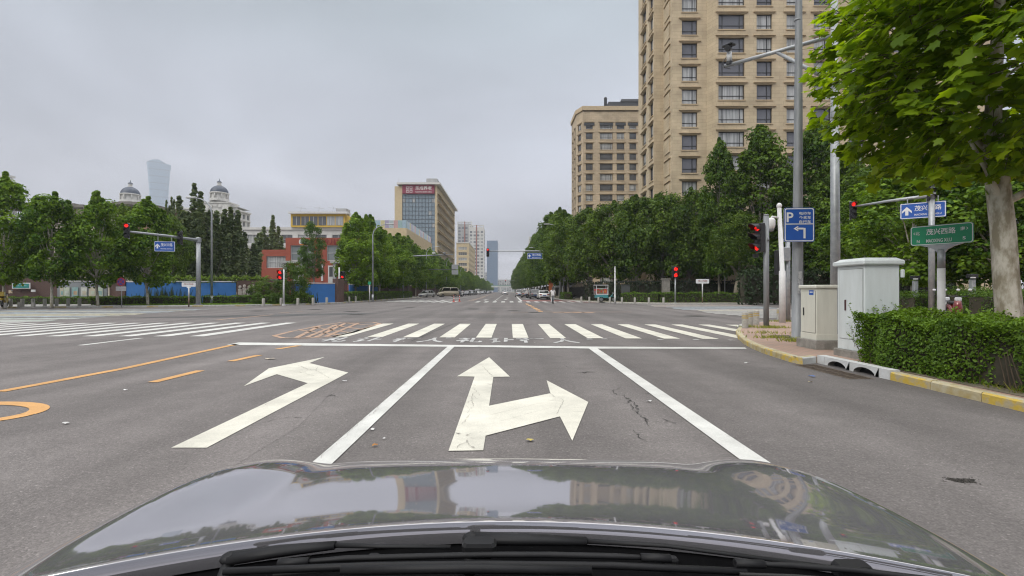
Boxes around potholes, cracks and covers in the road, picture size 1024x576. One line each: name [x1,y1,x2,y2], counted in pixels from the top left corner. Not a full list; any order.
drain grate [792,364,874,379]
pothole [942,476,981,485]
crack [566,366,674,441]
